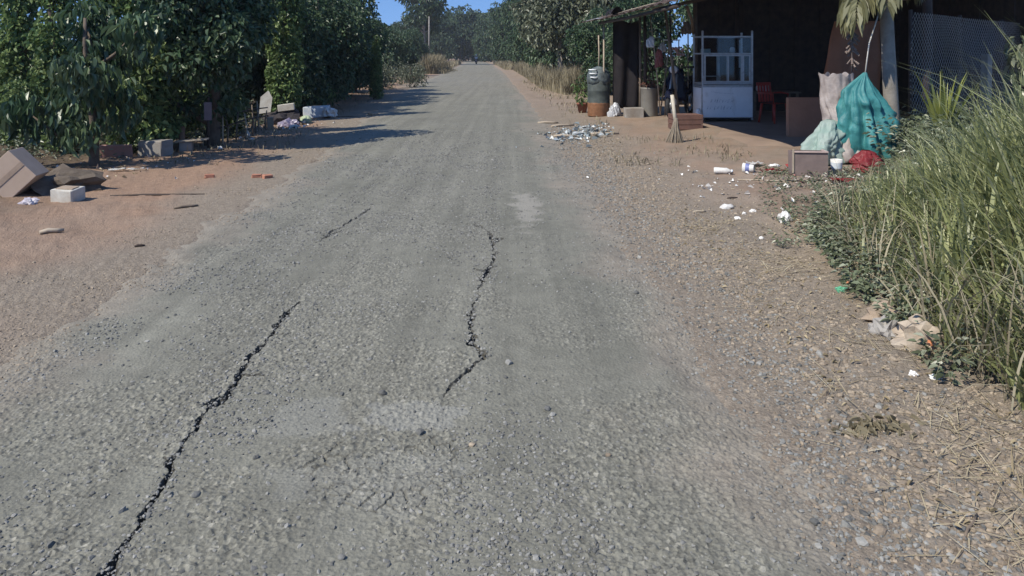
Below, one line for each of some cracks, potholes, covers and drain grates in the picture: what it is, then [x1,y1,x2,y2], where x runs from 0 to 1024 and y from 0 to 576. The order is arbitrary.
crack [320,208,371,242]
crack [96,301,301,576]
crack [437,224,504,405]
